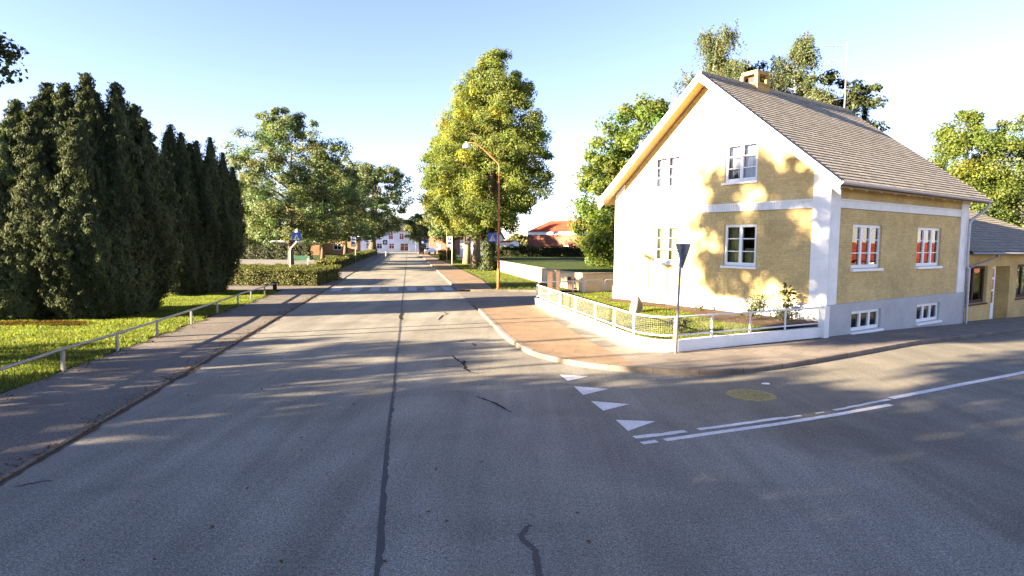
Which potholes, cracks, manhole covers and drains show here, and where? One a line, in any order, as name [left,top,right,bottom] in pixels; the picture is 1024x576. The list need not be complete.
crack [453,341,479,374]
